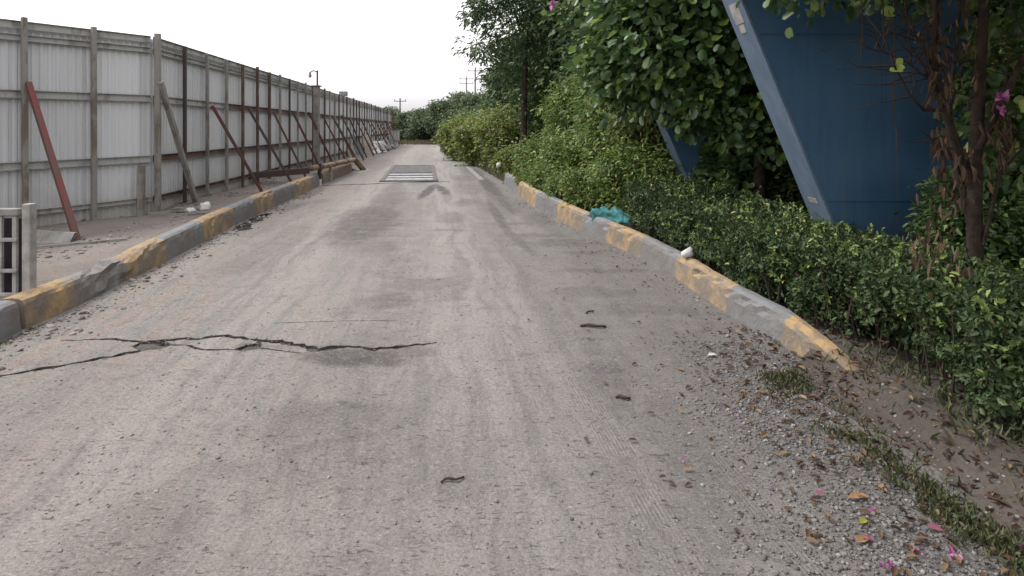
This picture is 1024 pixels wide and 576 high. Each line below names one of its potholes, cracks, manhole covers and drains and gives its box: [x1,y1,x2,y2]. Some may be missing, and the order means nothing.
drain grate [379,165,438,182]
crack [0,320,437,377]
